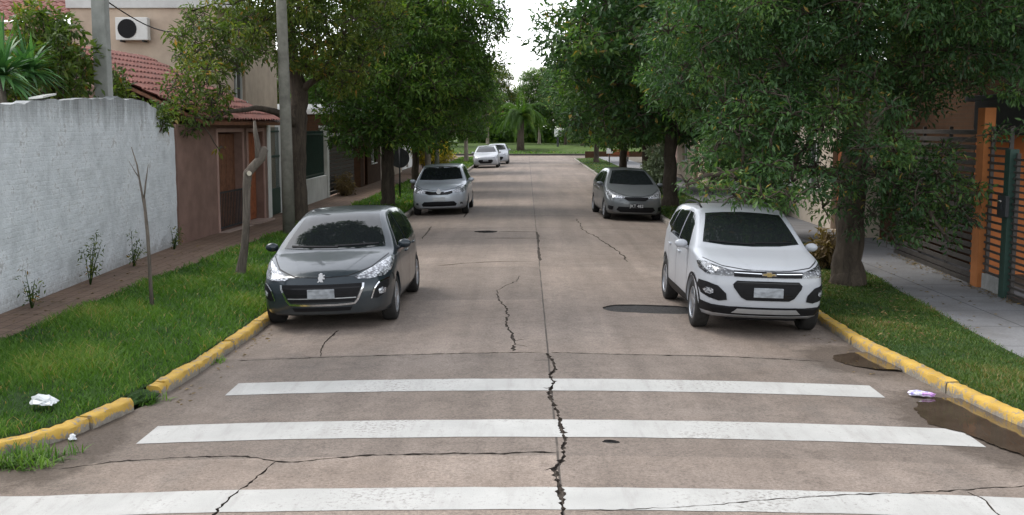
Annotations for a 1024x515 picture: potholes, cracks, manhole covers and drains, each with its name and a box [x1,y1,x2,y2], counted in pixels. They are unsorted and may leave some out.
crack [592,485,1024,515]
crack [62,261,810,515]
crack [576,220,627,261]
